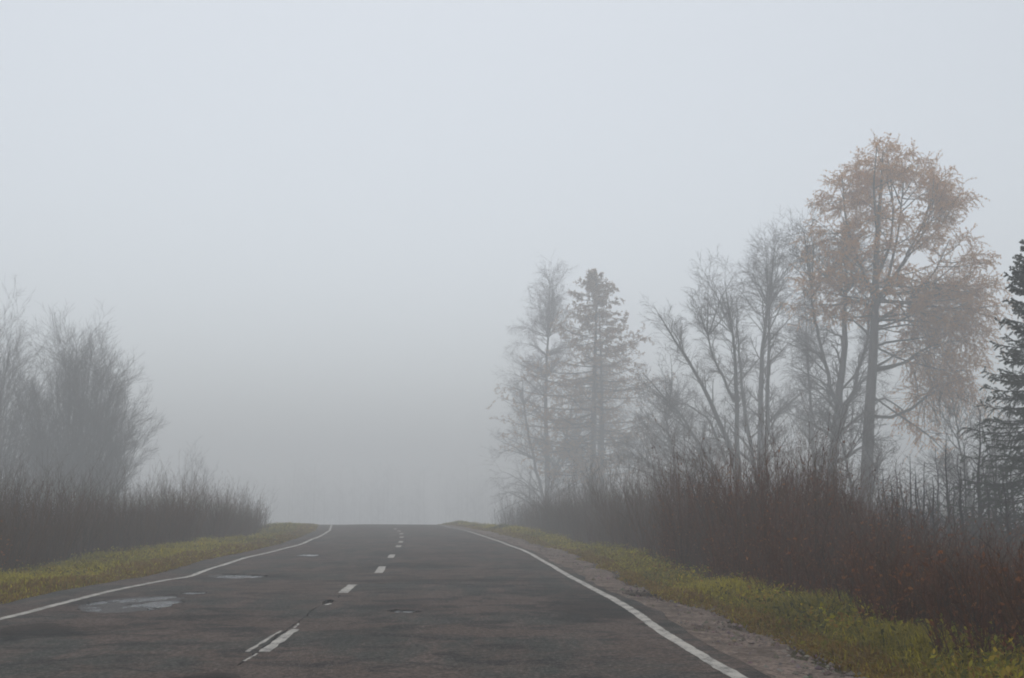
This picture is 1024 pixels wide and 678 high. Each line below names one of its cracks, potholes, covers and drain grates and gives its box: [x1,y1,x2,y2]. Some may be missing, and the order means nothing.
crack [237,594,339,666]
